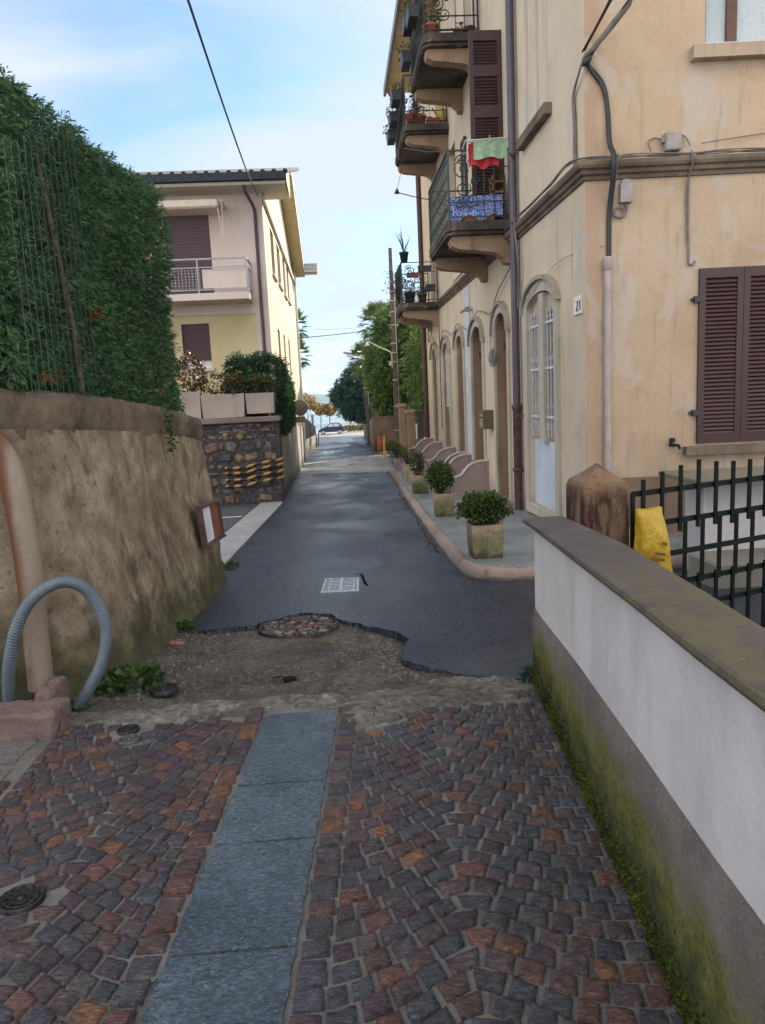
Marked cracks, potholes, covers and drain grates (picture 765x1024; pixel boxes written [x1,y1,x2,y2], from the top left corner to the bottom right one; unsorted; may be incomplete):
drain grate [321,577,359,593]
manhole cover [258,615,339,639]
manhole cover [0,883,46,916]
crack [399,491,440,553]
manhole cover [117,724,140,736]
